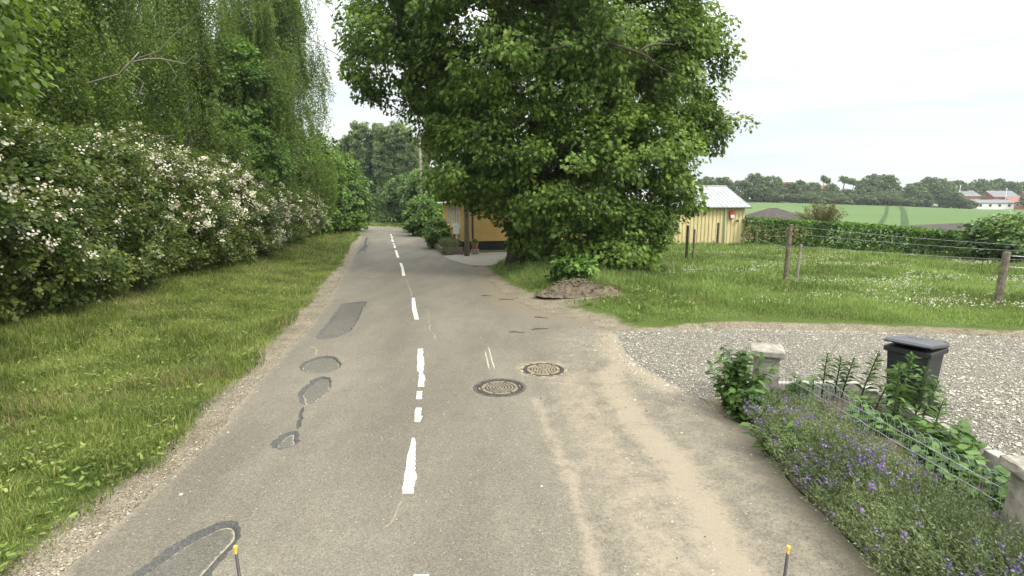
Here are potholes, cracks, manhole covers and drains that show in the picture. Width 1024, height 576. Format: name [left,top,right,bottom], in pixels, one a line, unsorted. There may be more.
pothole [270,431,301,450]
crack [382,497,403,530]
pothole [298,376,332,405]
manhole cover [473,378,526,397]
manhole cover [520,362,567,377]
crack [296,407,304,429]
crack [407,280,437,343]
pothole [131,520,241,576]
